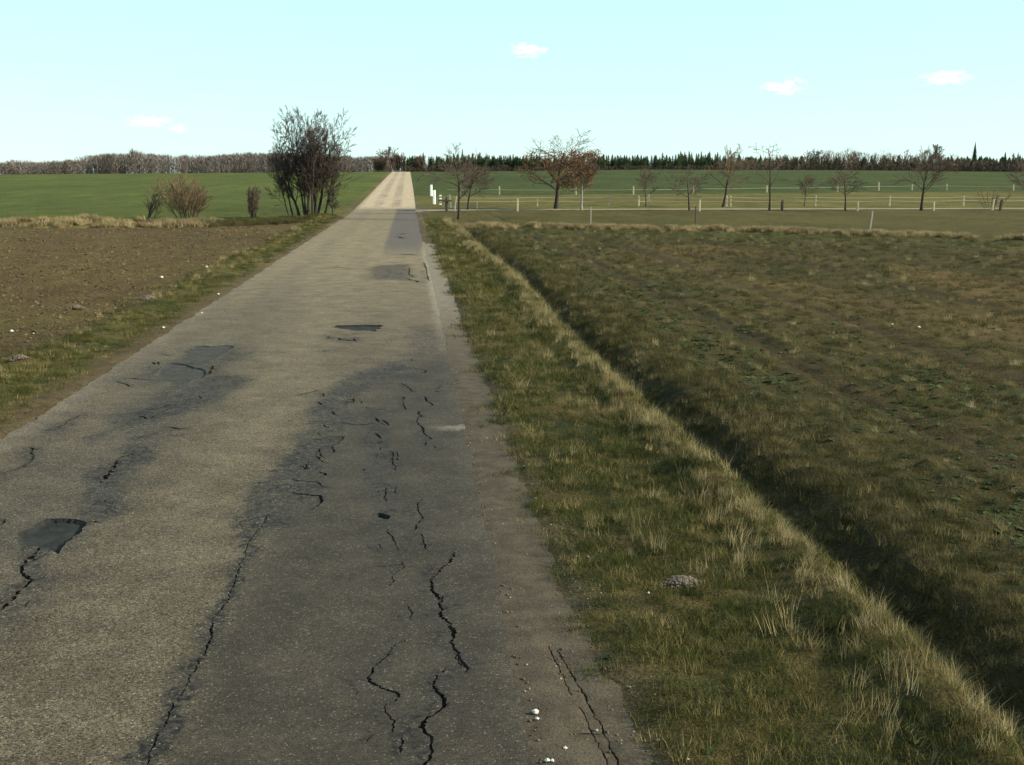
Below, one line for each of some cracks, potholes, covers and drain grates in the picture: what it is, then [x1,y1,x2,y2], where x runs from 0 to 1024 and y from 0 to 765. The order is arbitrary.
crack [146,515,267,765]
crack [292,359,441,510]
crack [0,548,40,611]
crack [9,447,35,472]
crack [366,499,470,765]
crack [98,436,143,504]
pothole [18,518,87,554]
